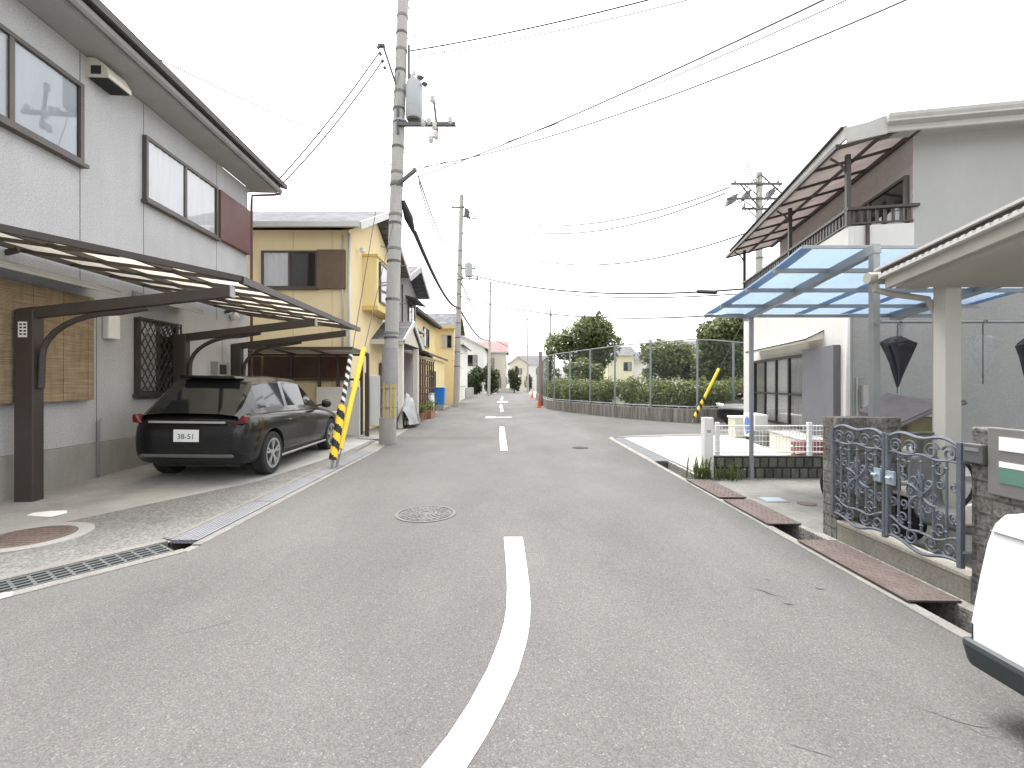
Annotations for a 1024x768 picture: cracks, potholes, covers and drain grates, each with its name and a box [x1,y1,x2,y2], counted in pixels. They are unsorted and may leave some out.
manhole cover [395,505,456,523]
crack [920,707,1001,738]
drain grate [0,544,174,593]
manhole cover [0,522,95,554]
